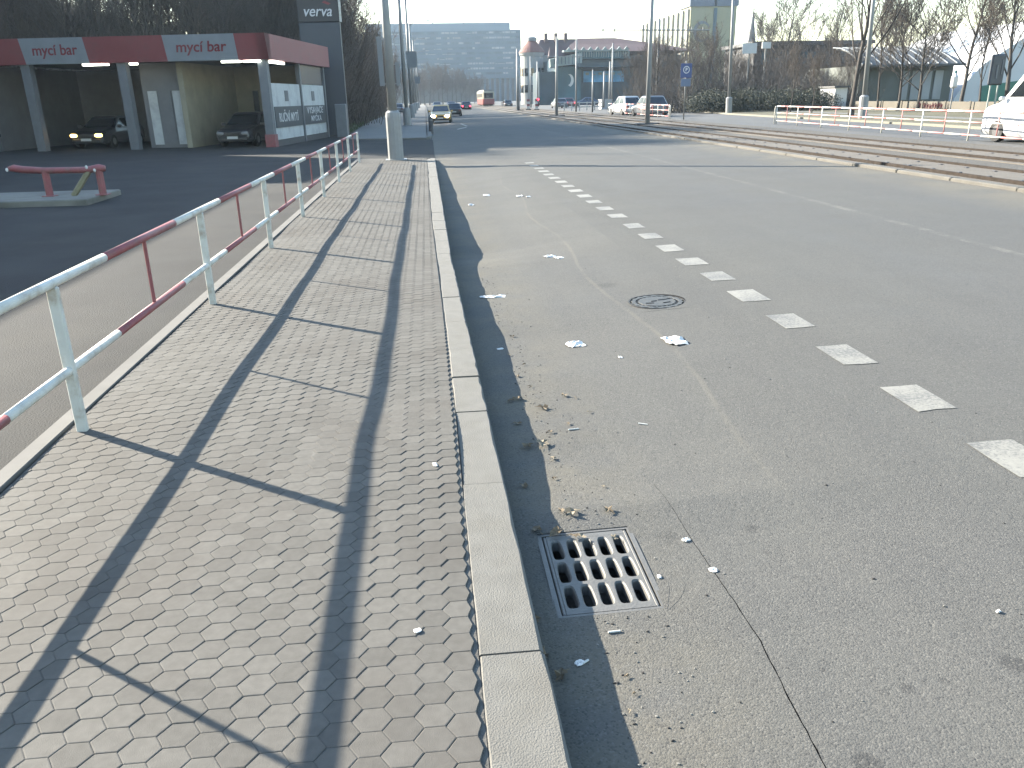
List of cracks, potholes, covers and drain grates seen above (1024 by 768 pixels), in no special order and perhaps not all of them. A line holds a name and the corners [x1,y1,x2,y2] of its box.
crack [658,489,826,768]
drain grate [537,526,665,618]
manhole cover [628,294,686,312]
